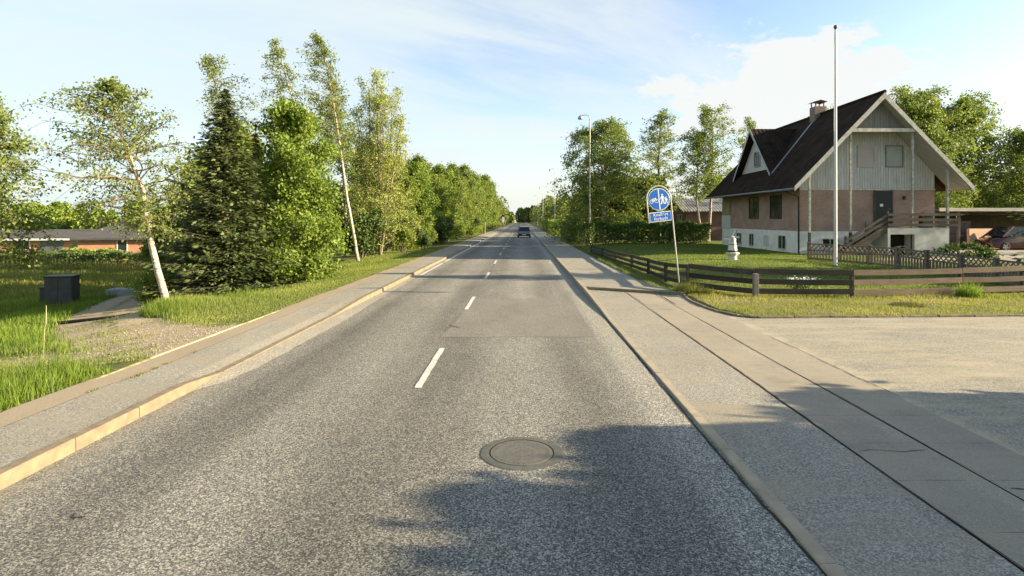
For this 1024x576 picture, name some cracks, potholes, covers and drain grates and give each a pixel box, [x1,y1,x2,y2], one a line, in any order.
manhole cover [479,437,564,471]
